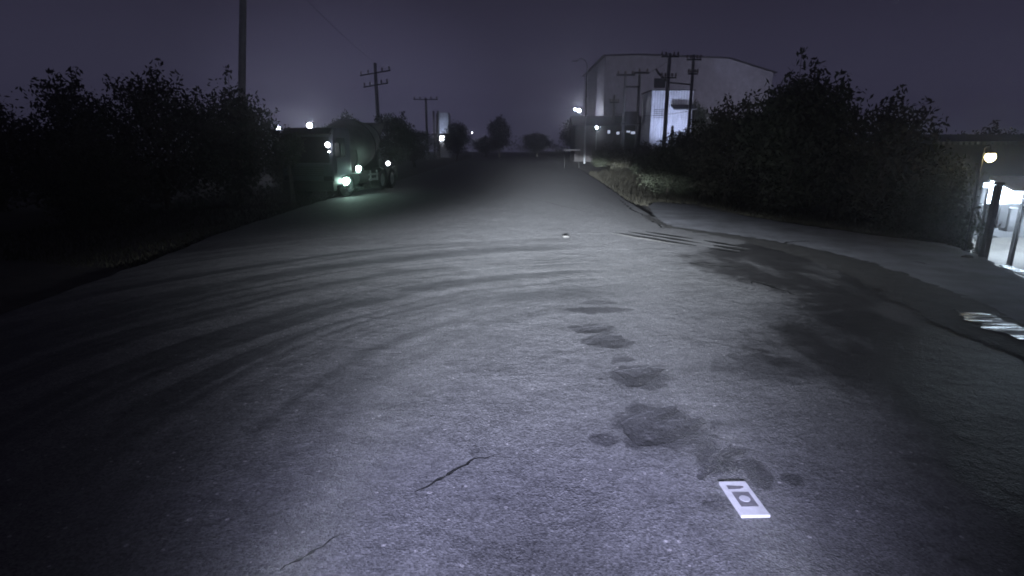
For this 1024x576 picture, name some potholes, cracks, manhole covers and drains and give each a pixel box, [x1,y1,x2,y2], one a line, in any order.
crack [280,535,339,570]
crack [415,456,491,492]
